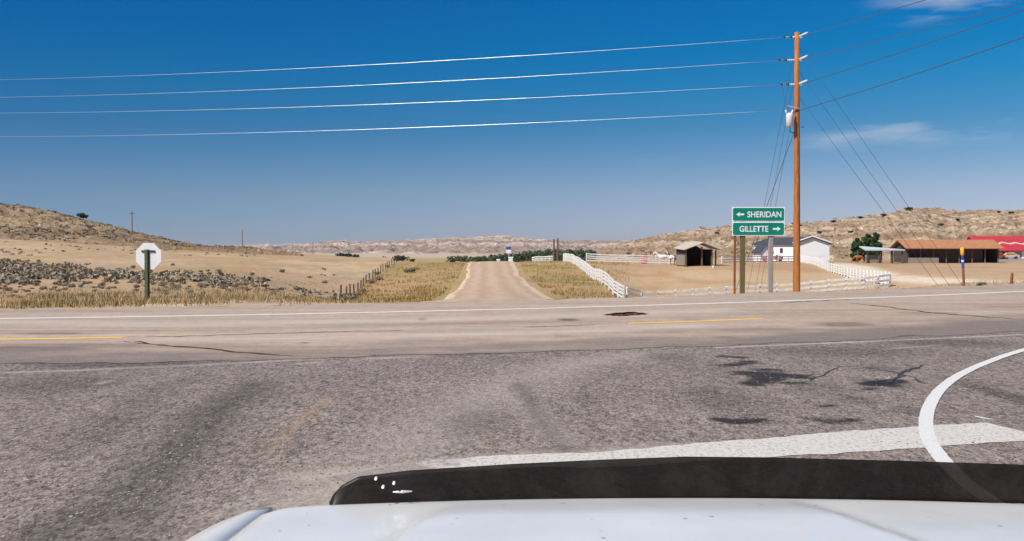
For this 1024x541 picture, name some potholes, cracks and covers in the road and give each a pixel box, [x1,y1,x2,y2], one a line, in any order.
crack [786,299,1021,320]
crack [123,330,399,356]
